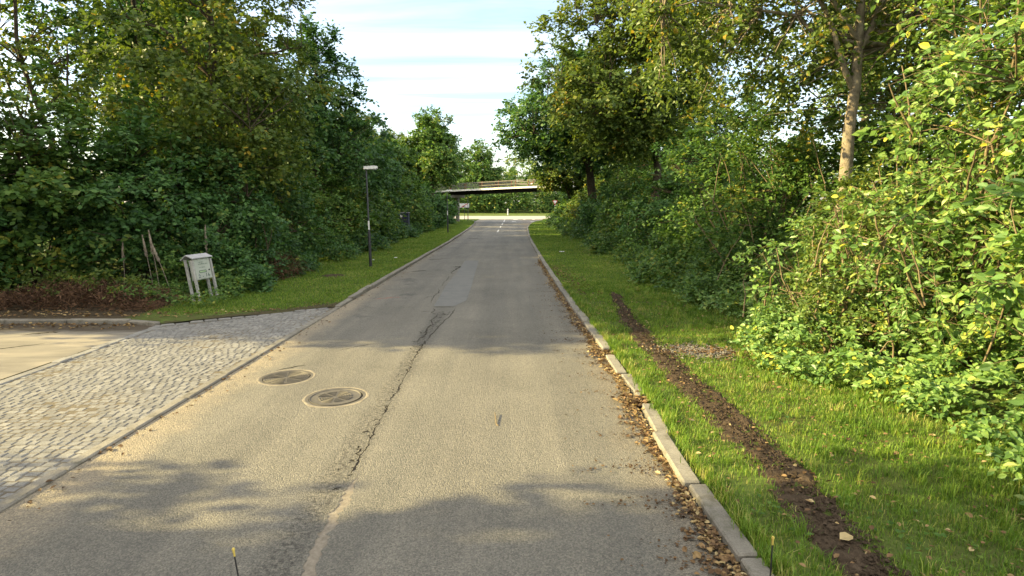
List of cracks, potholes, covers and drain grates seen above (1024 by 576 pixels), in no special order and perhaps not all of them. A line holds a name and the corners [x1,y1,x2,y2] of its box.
crack [333,266,461,490]
manhole cover [302,387,369,408]
manhole cover [256,369,316,386]
